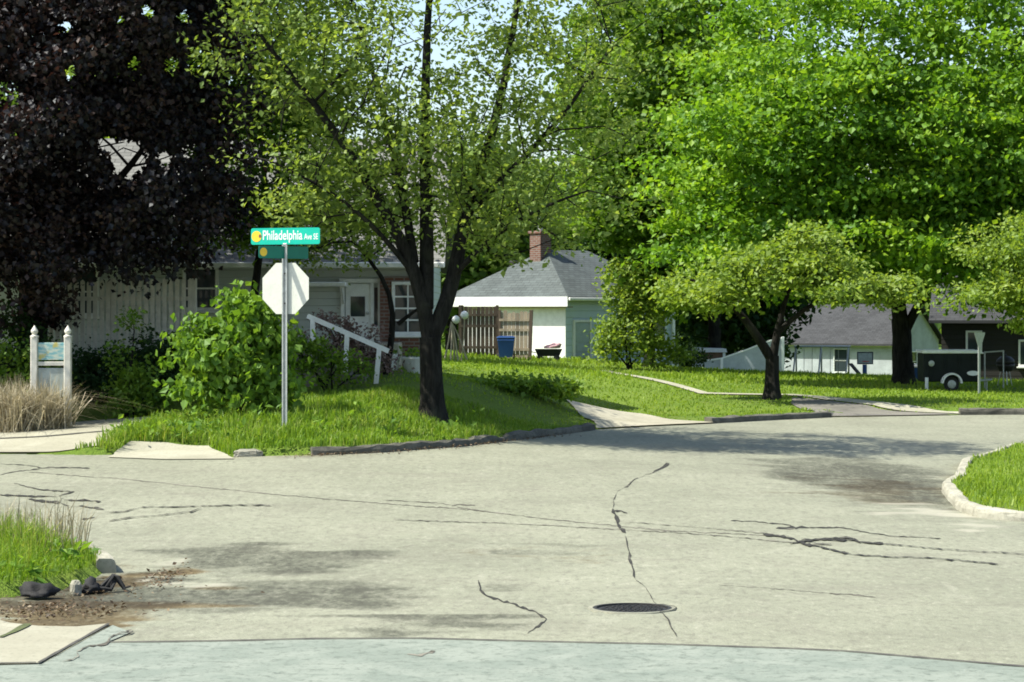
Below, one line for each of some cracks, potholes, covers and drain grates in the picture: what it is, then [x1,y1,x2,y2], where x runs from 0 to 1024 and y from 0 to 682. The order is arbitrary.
crack [64,629,133,661]
manhole cover [588,603,676,614]
crack [0,463,1022,636]
